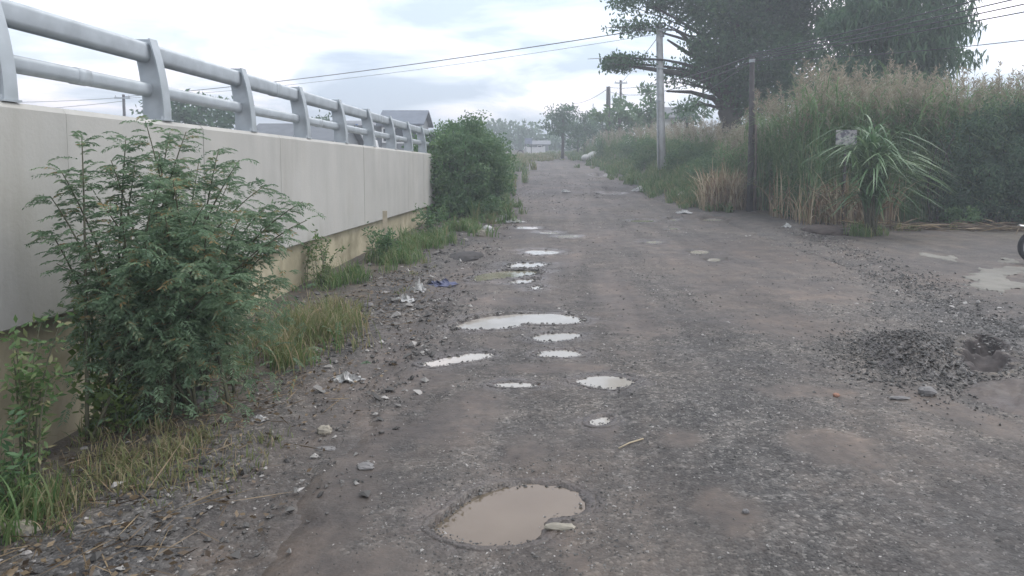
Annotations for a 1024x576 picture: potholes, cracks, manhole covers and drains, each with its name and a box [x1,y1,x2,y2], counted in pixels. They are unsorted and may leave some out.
pothole [422,477,597,551]
pothole [486,379,545,389]
pothole [582,412,622,428]
pothole [498,262,556,271]
pothole [528,347,588,359]
pothole [503,276,546,285]
pothole [522,330,588,343]
pothole [565,372,642,391]
pothole [443,311,591,331]
pothole [463,268,550,283]
pothole [950,333,1021,377]
pothole [411,350,501,368]
